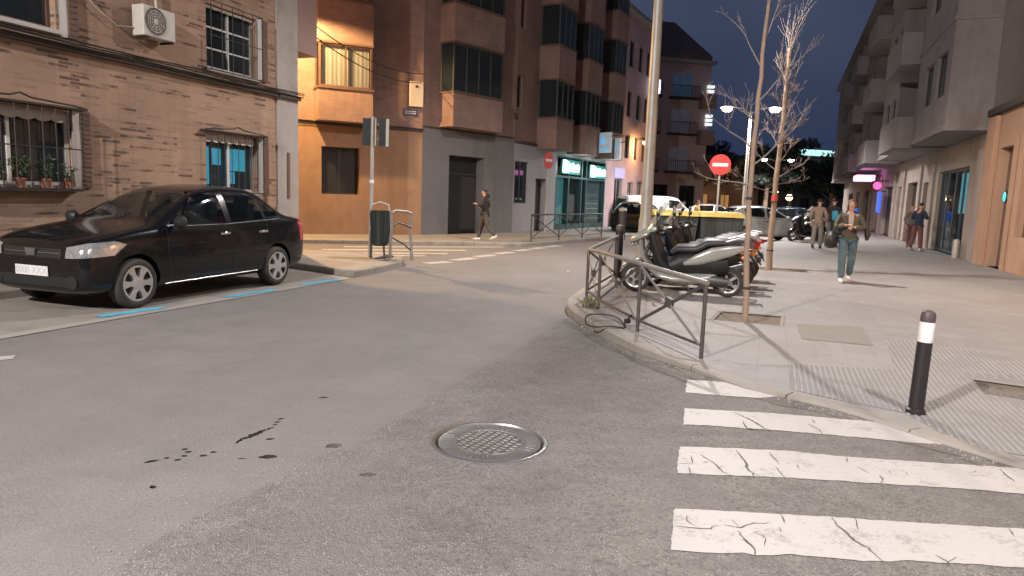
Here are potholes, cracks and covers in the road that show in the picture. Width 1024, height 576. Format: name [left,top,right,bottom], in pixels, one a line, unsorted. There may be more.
crack [682,514,785,556]
crack [832,517,884,562]
manhole cover [431,422,548,464]
crack [681,450,799,477]
